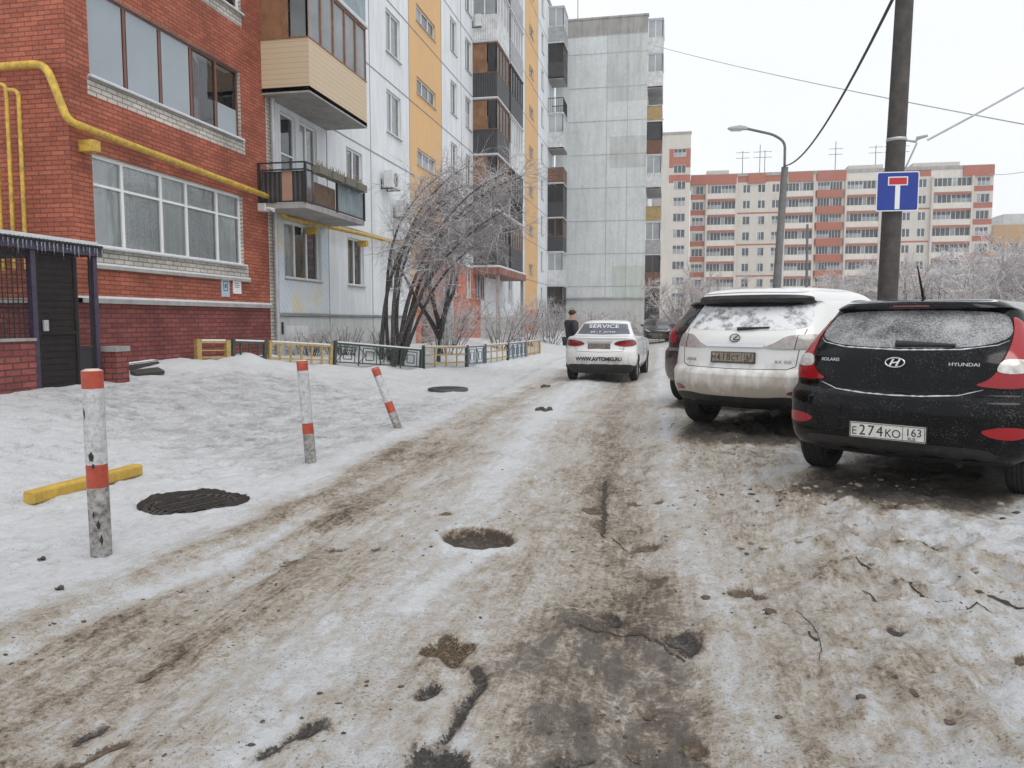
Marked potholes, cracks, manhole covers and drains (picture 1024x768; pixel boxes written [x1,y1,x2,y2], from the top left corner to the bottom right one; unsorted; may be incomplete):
pothole [447,537,509,550]
crack [569,624,685,662]
pothole [666,630,704,658]
manhole cover [136,488,250,515]
crack [600,480,639,552]
crack [855,556,1024,612]
crack [795,610,822,660]
pothole [419,633,476,668]
